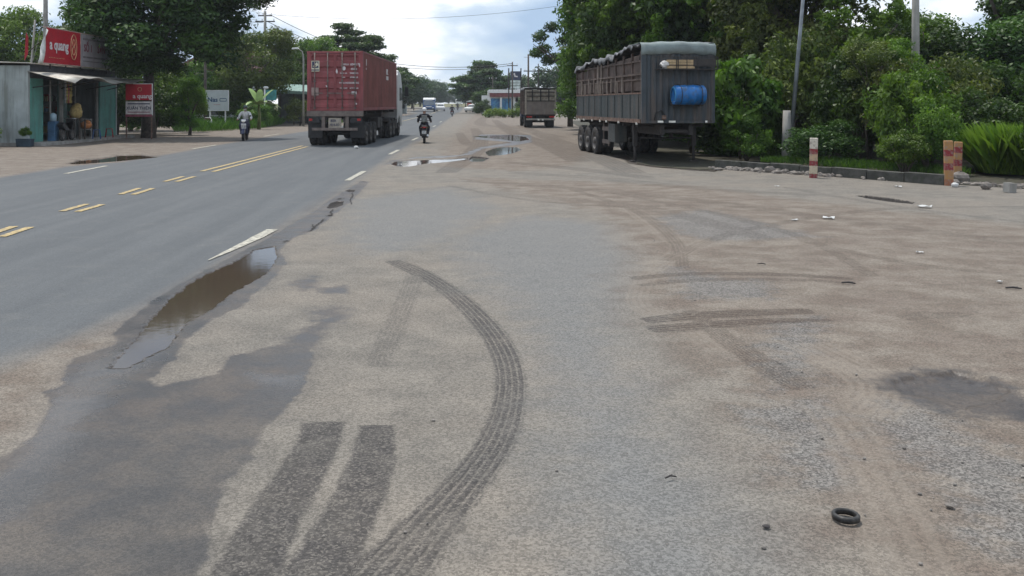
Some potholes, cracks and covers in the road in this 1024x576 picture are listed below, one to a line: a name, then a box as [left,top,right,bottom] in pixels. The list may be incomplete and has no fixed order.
pothole [373,157,467,168]
pothole [46,154,182,166]
crack [309,193,353,231]
pothole [79,244,293,377]
pothole [453,134,549,142]
pothole [467,146,540,157]
